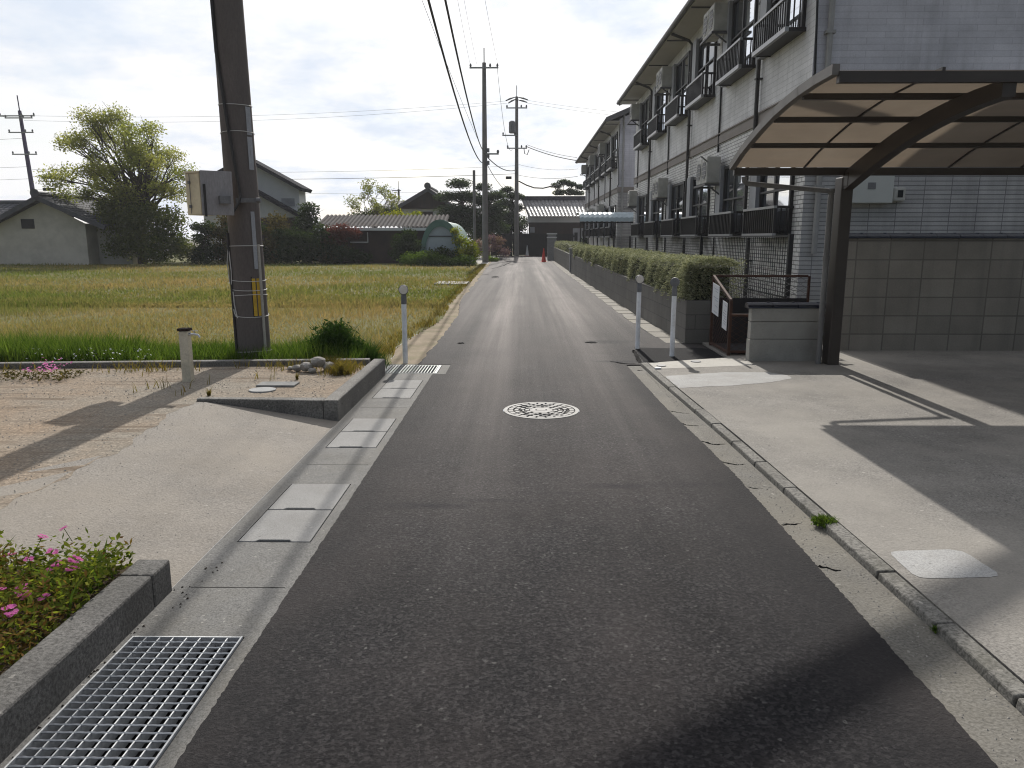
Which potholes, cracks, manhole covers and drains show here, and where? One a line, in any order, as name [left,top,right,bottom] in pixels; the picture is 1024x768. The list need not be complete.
drain grate [385,365,442,374]
manhole cover [504,402,579,419]
drain grate [4,636,243,768]
